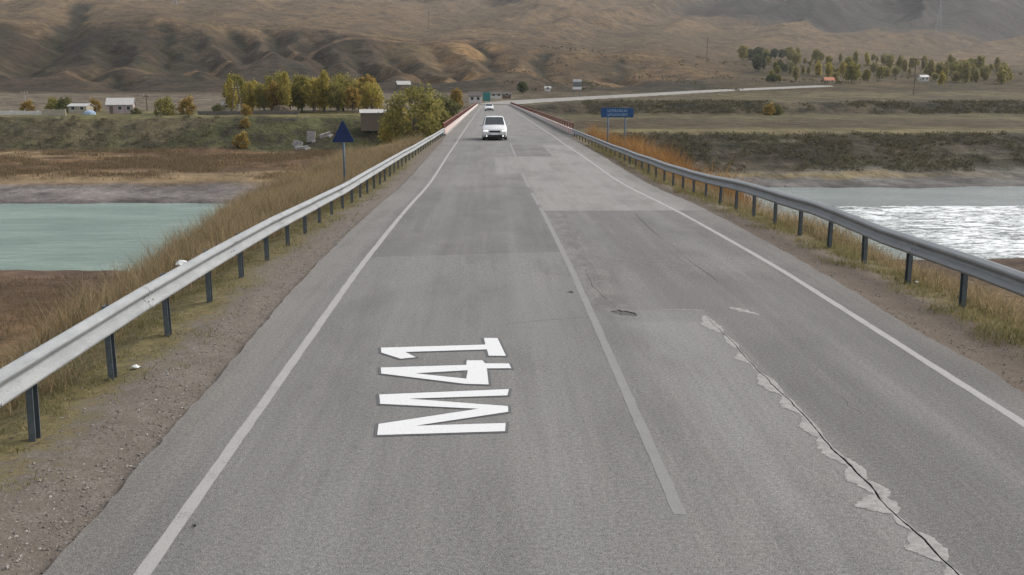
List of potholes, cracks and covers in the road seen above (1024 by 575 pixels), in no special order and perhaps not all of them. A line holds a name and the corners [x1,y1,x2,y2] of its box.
crack [699,315,962,575]
